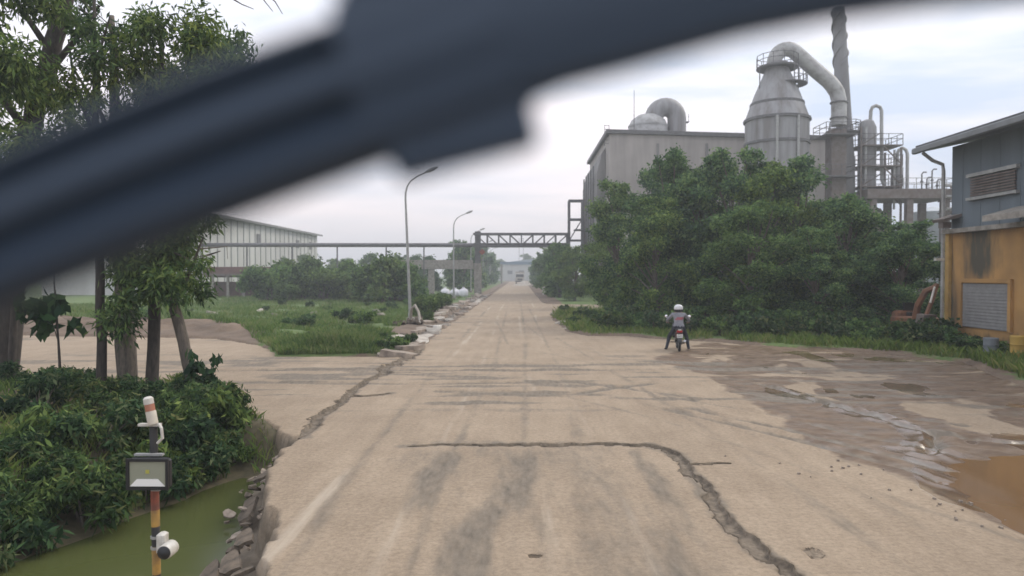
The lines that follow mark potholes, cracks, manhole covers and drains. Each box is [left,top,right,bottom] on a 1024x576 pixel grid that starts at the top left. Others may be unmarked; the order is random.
crack [298,350,803,576]
pothole [801,547,825,560]
